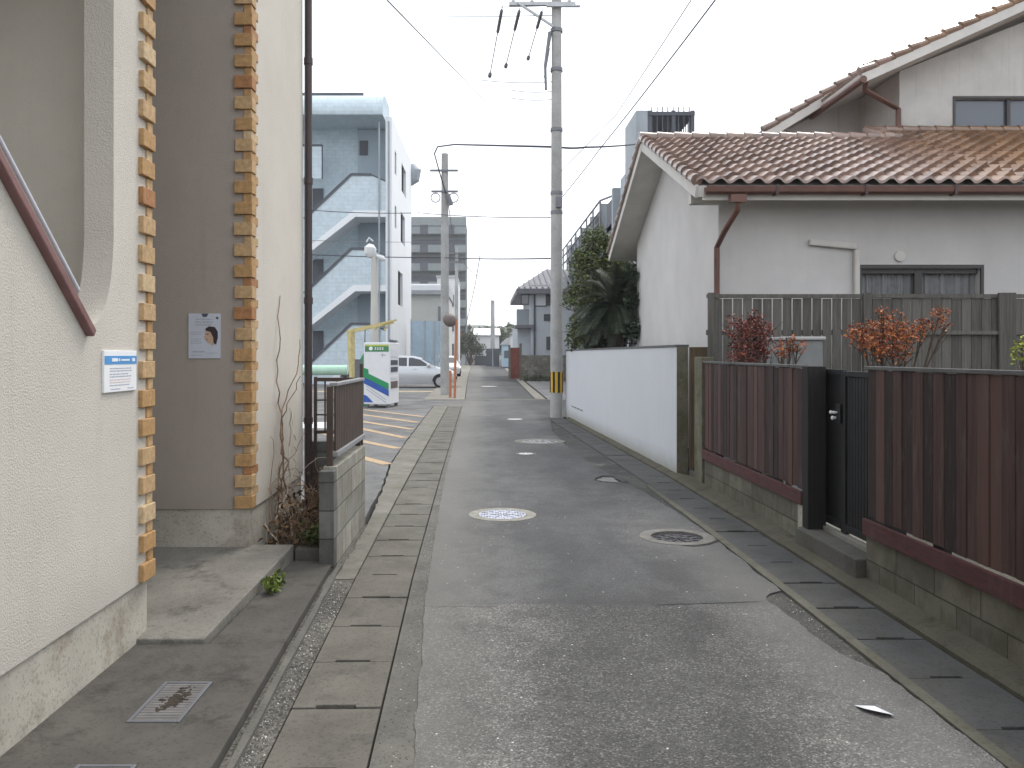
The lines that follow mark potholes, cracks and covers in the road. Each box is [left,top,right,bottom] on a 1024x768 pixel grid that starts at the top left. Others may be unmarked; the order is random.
manhole cover [639,529,715,545]
manhole cover [468,508,536,521]
drain grate [126,681,212,723]
